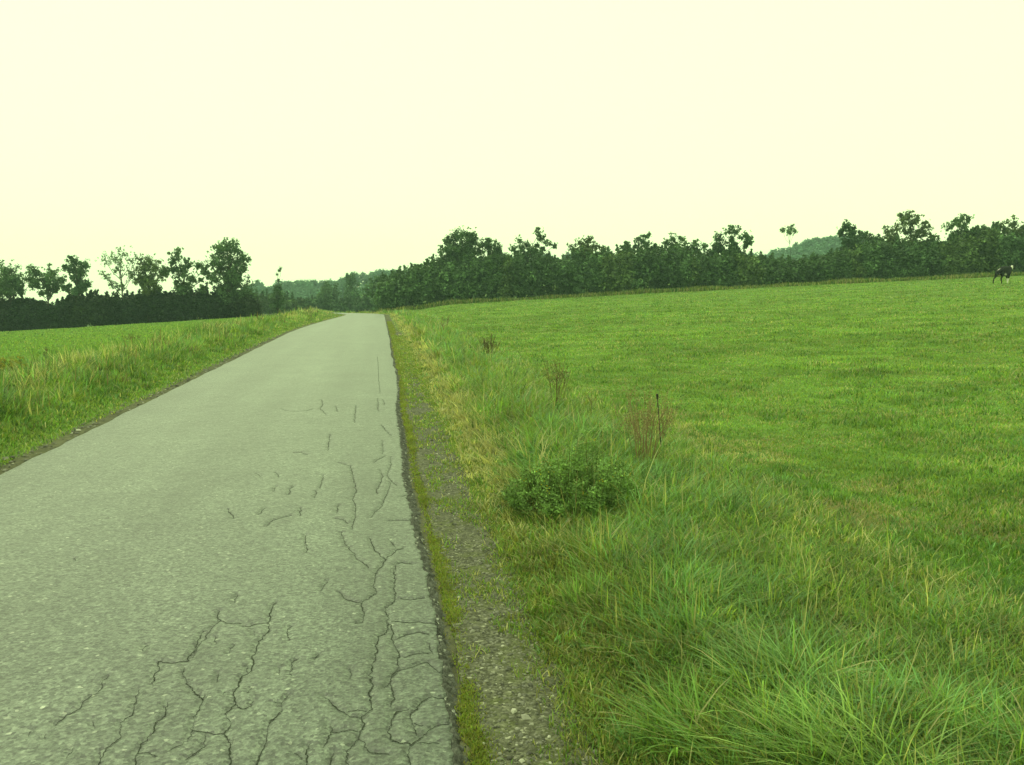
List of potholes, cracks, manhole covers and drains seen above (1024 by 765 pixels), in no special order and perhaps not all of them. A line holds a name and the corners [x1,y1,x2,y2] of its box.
crack [295,428,453,765]
crack [28,594,292,765]
